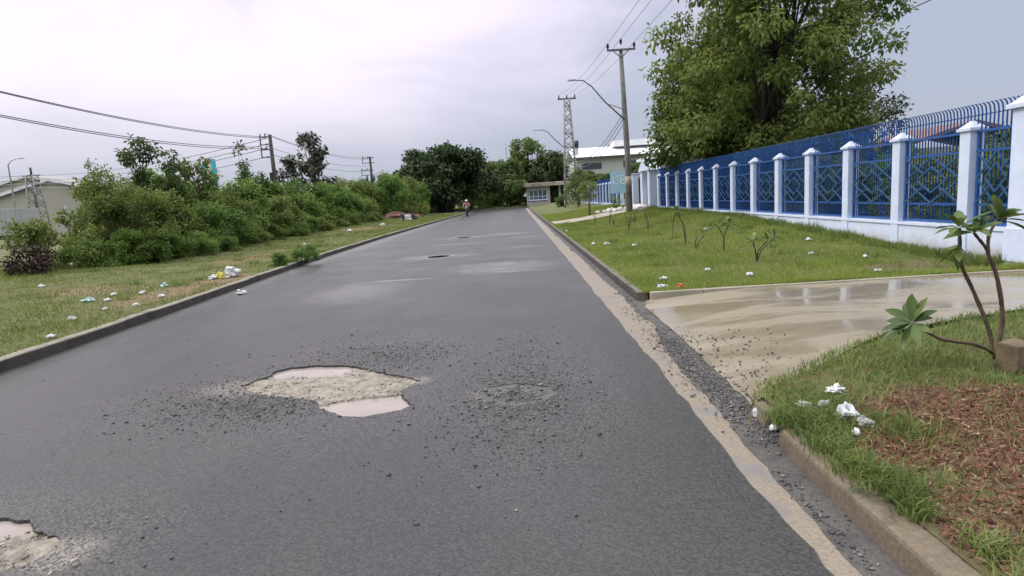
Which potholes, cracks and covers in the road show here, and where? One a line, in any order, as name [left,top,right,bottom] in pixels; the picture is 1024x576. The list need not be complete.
pothole [0,518,60,573]
pothole [479,383,559,406]
pothole [241,365,420,417]
